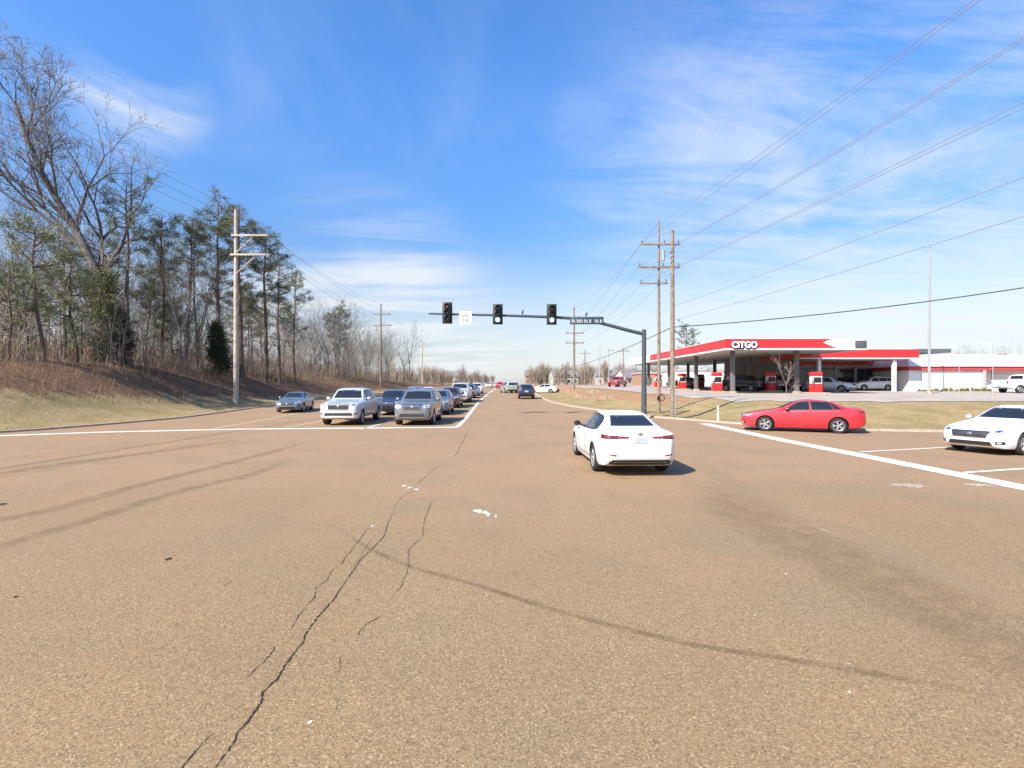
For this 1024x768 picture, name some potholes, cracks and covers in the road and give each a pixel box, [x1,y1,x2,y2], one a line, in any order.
crack [181,466,437,768]
